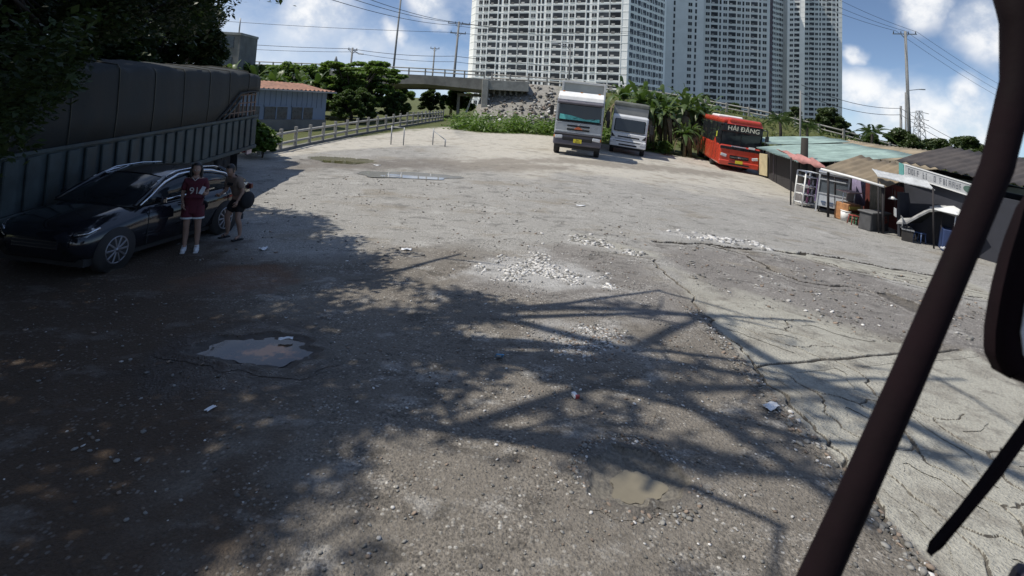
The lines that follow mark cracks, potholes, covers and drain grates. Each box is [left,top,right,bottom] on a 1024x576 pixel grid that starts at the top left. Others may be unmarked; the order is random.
pothole [153,326,349,379]
crack [583,238,1024,576]
pothole [294,155,391,167]
pothole [569,433,715,522]
